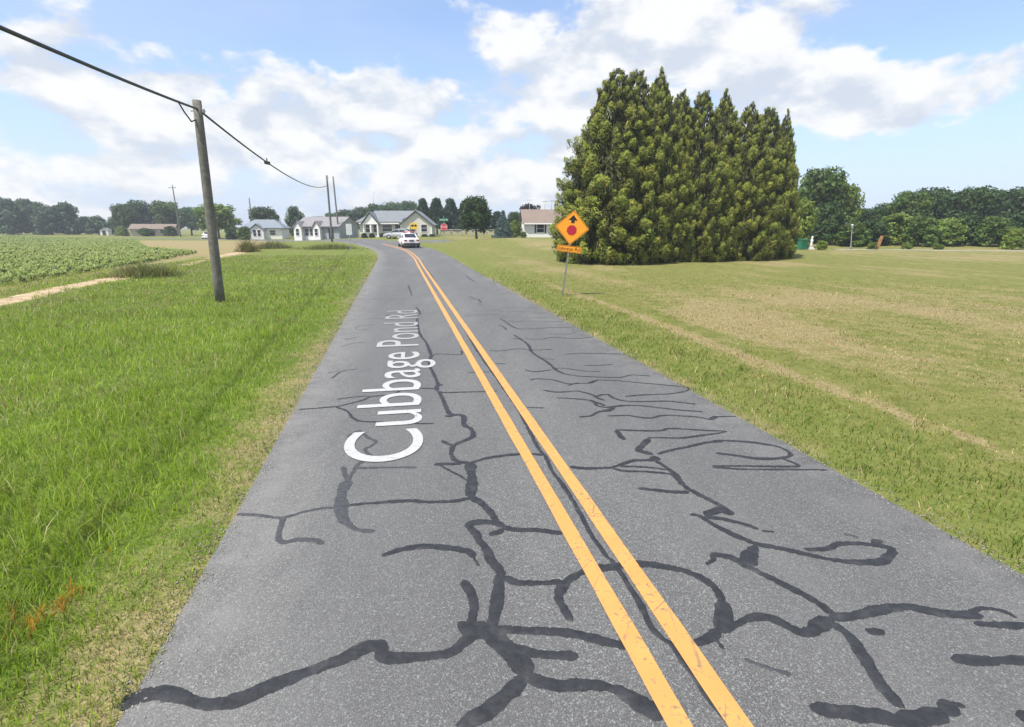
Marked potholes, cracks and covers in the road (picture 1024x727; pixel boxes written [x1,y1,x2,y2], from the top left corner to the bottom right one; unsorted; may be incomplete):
crack [116,275,1024,727]
